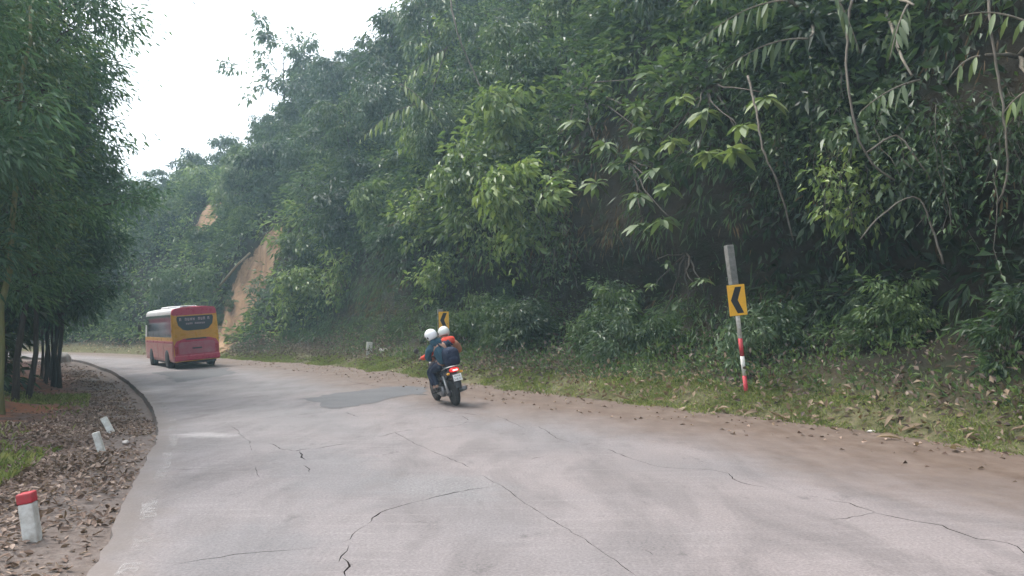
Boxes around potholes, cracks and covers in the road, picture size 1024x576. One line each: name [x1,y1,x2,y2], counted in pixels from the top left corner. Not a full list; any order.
crack [180,487,487,576]
crack [832,500,1024,553]
